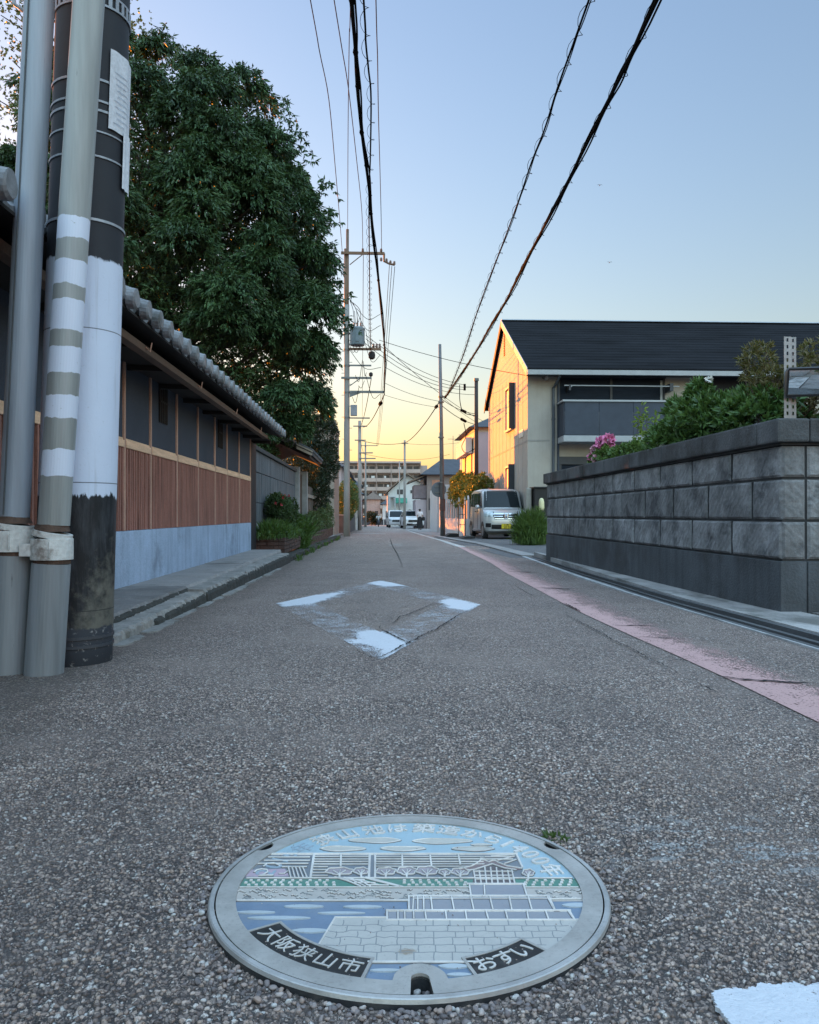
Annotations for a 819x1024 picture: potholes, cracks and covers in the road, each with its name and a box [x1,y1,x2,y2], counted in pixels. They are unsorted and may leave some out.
manhole cover [207,814,611,1011]
crack [357,602,467,658]
